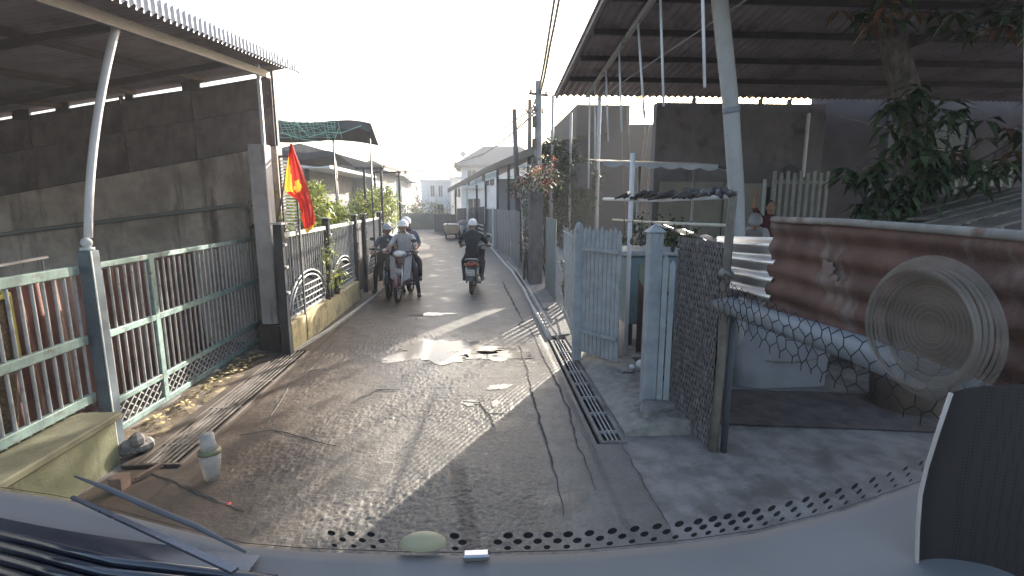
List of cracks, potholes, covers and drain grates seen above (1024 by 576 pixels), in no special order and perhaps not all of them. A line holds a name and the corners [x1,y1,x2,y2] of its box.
crack [353,389,400,402]
drain grate [121,350,310,470]
crack [463,280,596,515]
drain grate [550,340,627,444]
crack [241,343,336,446]
